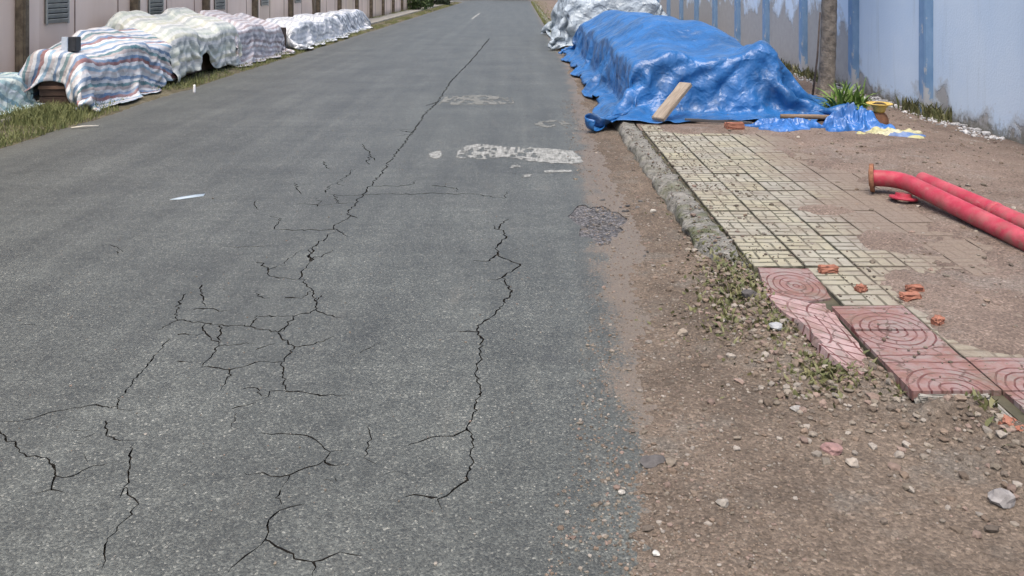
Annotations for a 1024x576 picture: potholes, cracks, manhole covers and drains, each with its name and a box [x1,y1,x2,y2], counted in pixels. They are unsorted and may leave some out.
pothole [568,205,628,247]
crack [0,38,506,568]
